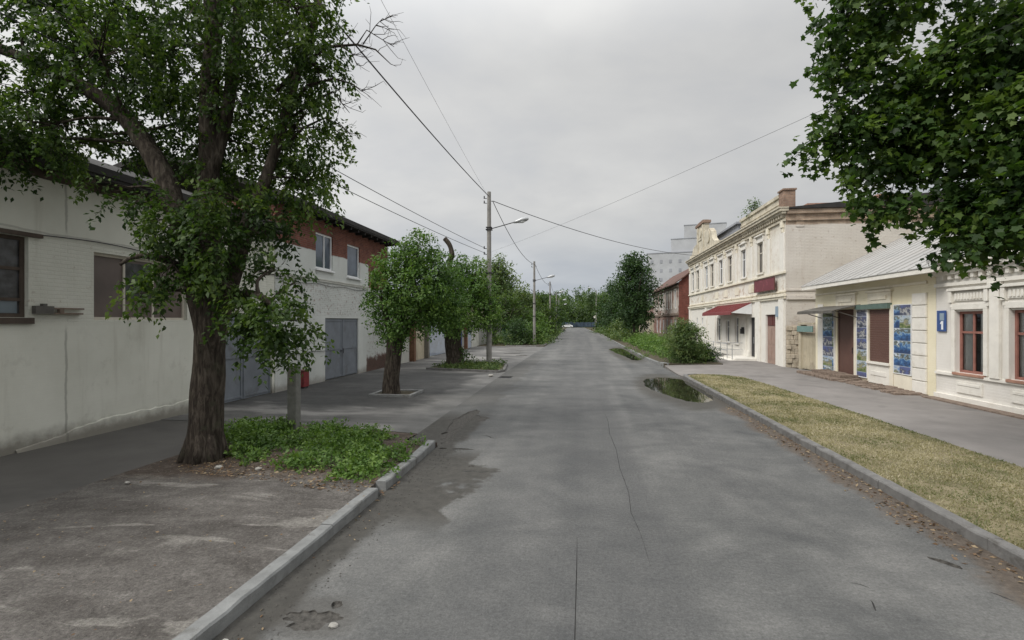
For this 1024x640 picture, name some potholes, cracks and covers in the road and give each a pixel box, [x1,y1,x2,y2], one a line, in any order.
crack [608,424,651,566]
pothole [283,610,344,631]
